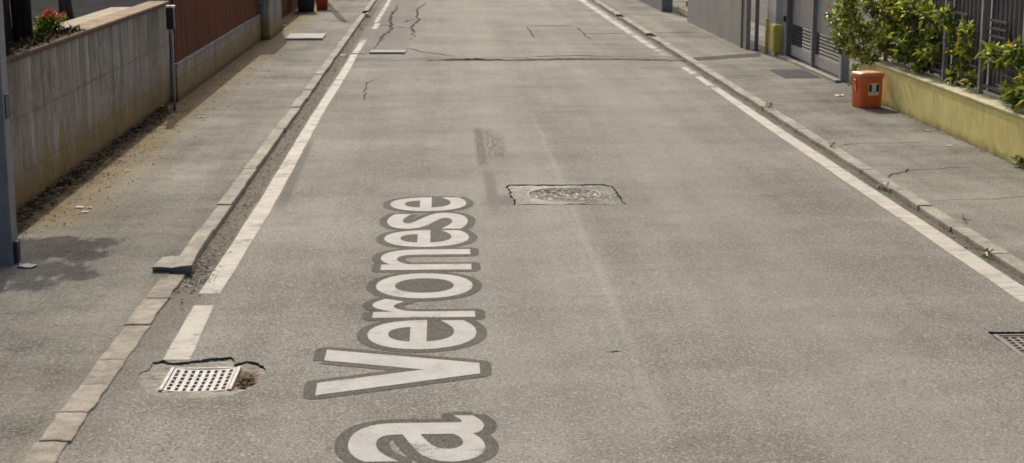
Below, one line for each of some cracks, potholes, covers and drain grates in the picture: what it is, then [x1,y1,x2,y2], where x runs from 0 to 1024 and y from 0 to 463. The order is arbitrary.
crack [352,2,685,61]
pothole [138,357,266,399]
drain grate [158,366,241,393]
manhole cover [506,184,626,205]
drain grate [987,331,1024,355]
